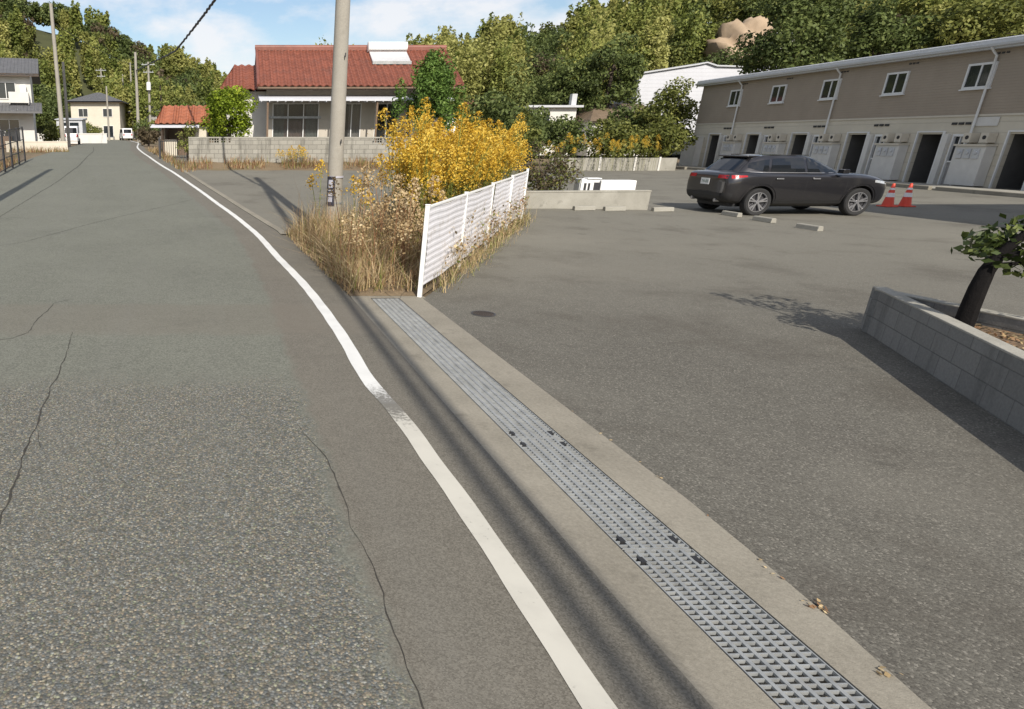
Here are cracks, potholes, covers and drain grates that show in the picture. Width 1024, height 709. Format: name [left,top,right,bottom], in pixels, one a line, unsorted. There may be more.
crack [0,332,73,523]
drain grate [623,549,879,709]
drain grate [448,374,561,439]
drain grate [406,333,487,375]
drain grate [512,438,690,551]
drain grate [377,304,439,333]
